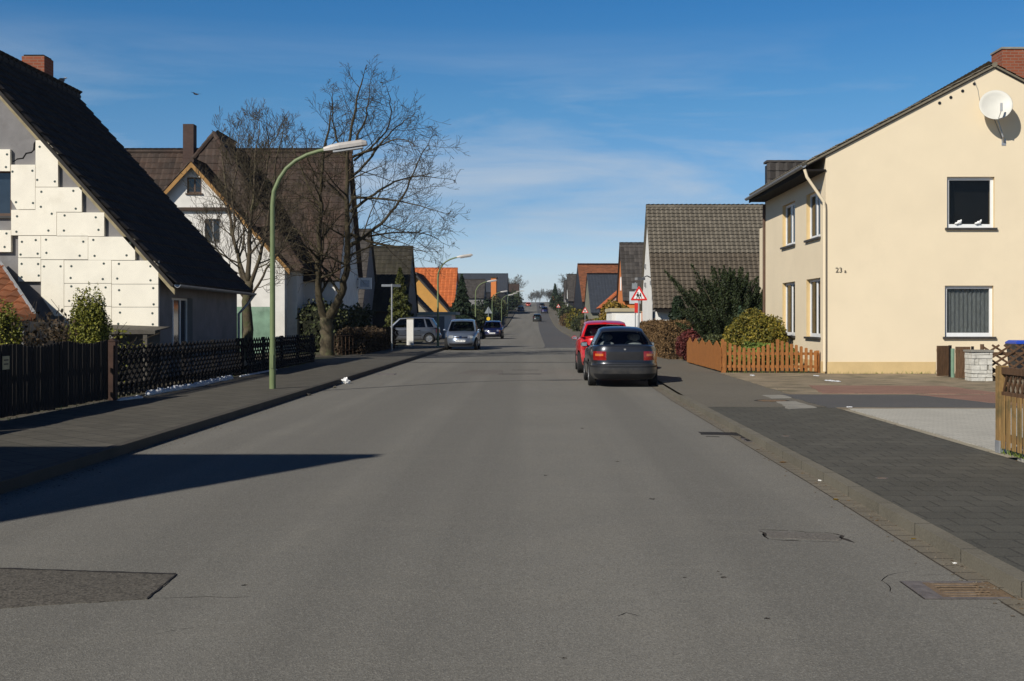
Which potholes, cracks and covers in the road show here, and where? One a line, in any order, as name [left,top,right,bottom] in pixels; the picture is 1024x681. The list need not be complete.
drain grate [899,581,1015,602]
